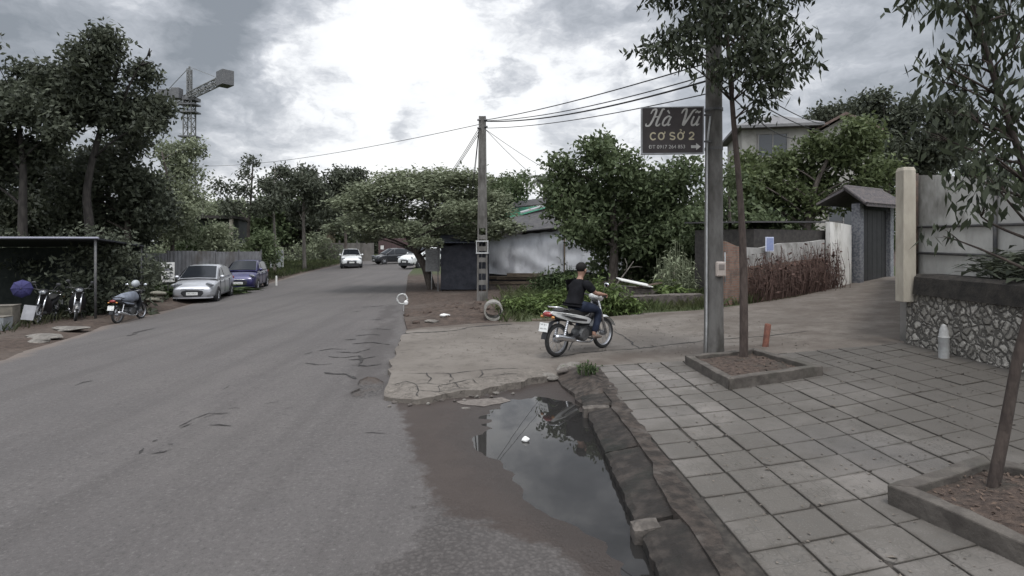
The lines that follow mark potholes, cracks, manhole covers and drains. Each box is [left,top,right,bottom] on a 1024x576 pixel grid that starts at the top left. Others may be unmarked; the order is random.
crack [139,376,290,454]
crack [305,305,505,379]
pothole [350,377,384,399]
crack [393,368,515,396]
